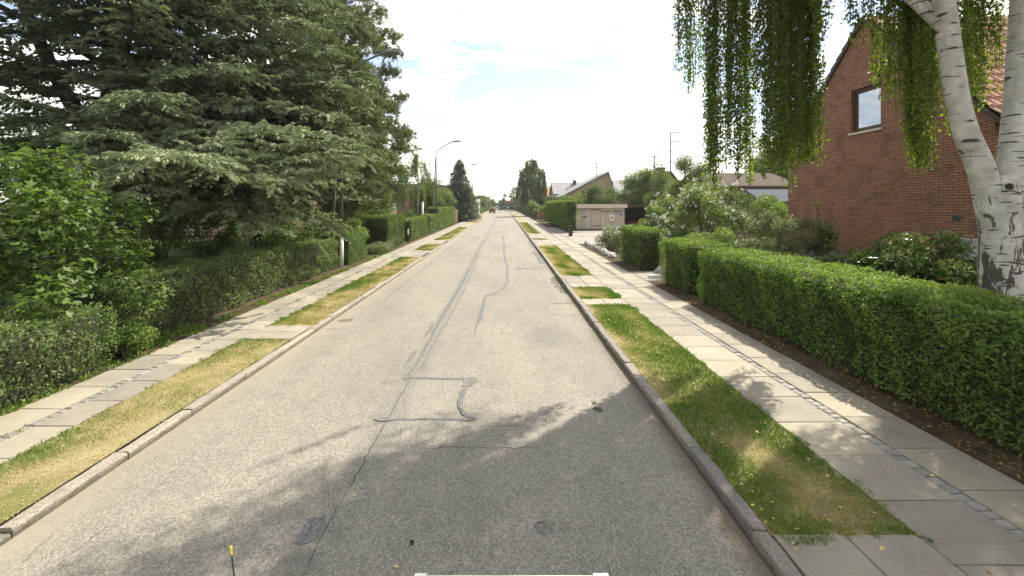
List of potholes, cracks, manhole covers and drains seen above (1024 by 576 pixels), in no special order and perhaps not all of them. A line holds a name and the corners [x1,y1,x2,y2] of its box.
crack [302,380,409,576]
